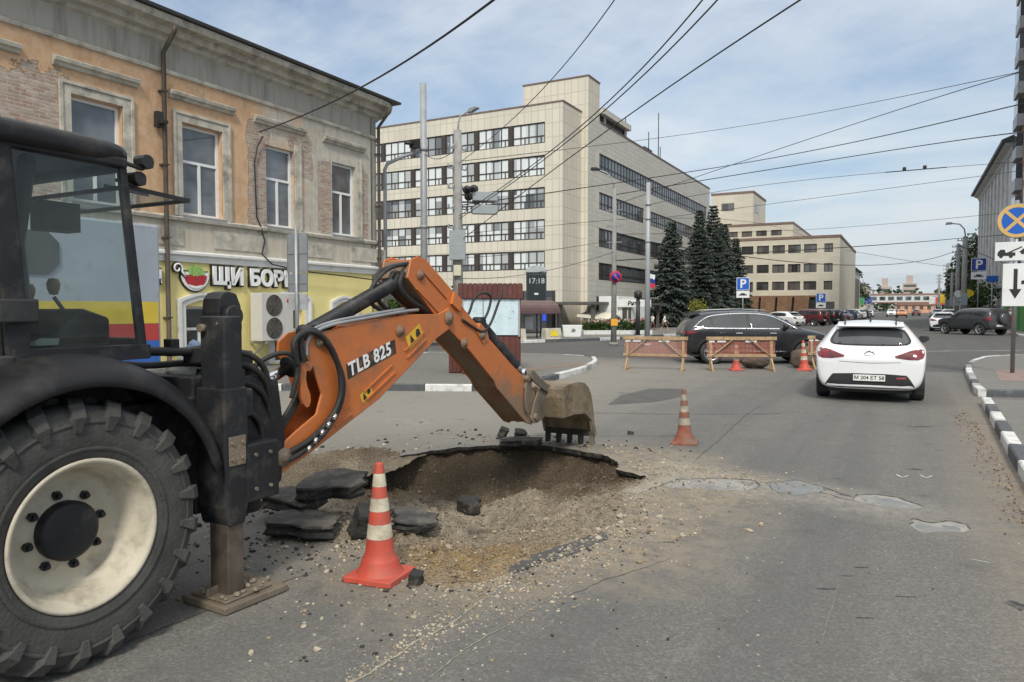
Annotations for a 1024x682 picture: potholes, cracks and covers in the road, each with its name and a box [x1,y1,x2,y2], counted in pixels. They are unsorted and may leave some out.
crack [817,567,862,641]
